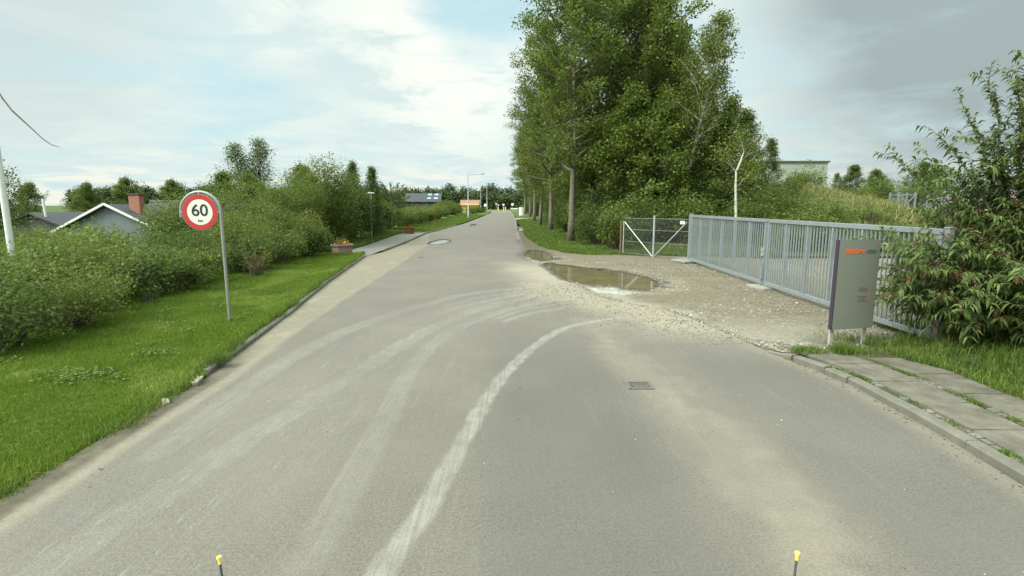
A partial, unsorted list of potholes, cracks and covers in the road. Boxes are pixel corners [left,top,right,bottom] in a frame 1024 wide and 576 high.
pothole [542,263,661,290]
drain grate [624,381,655,390]
